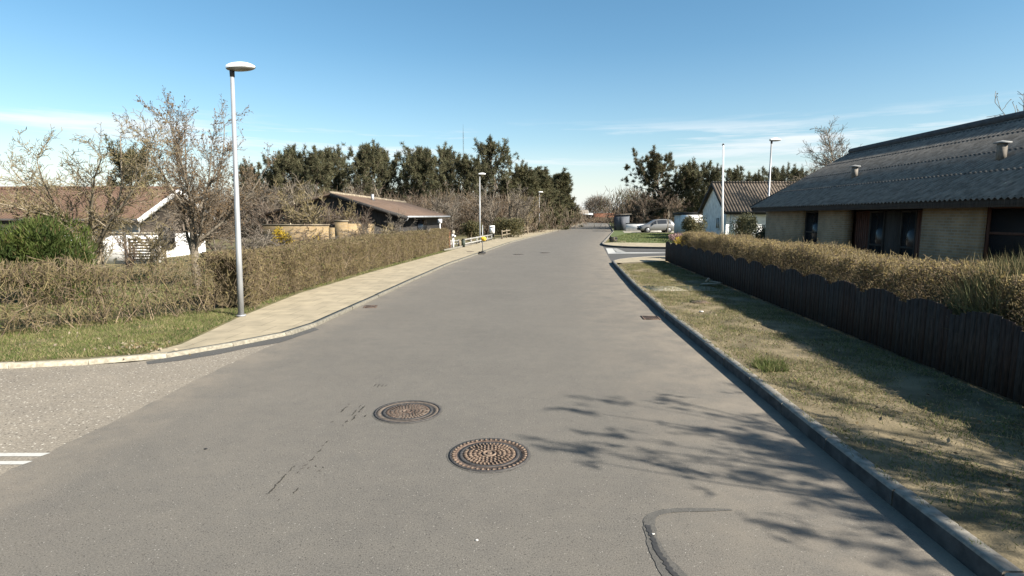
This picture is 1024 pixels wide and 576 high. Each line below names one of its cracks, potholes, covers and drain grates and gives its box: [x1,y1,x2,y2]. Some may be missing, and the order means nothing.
manhole cover [372,400,443,424]
crack [268,441,328,501]
manhole cover [446,438,531,473]
